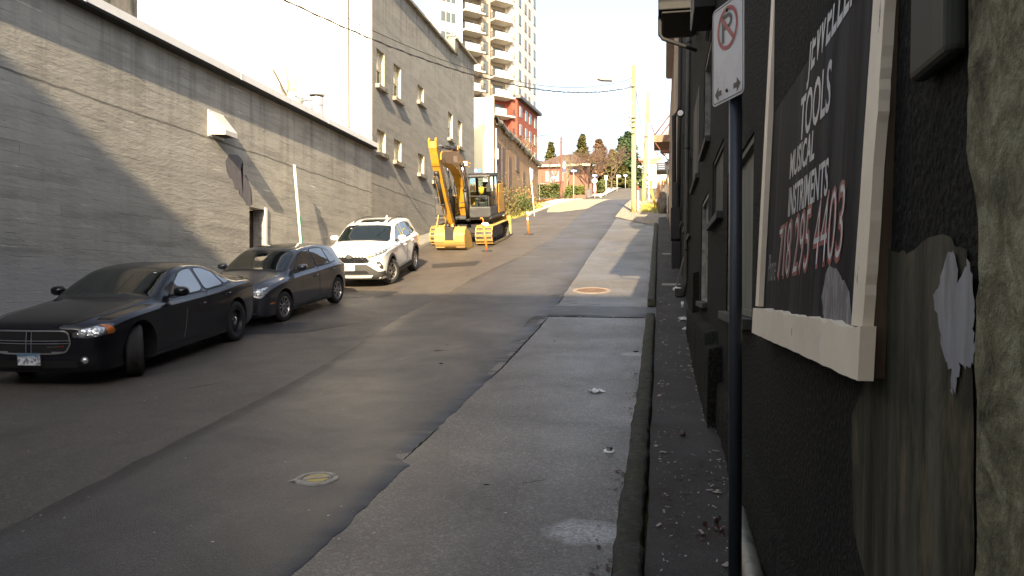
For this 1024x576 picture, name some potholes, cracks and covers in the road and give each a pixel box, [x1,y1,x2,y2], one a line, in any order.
manhole cover [289,472,340,486]
